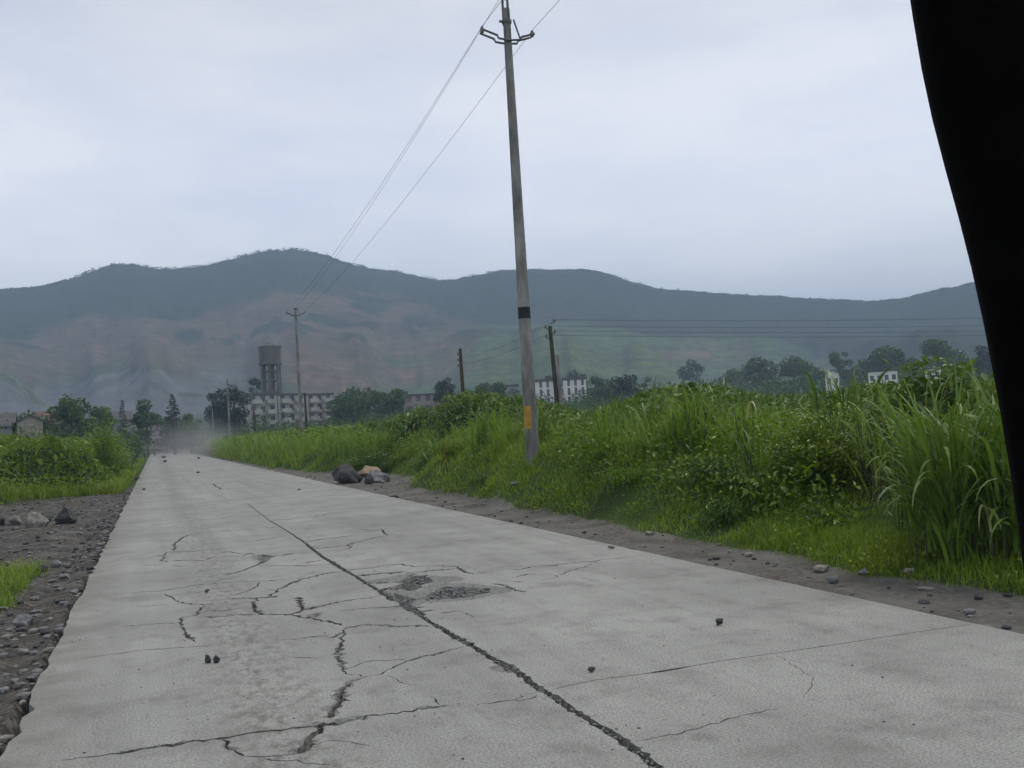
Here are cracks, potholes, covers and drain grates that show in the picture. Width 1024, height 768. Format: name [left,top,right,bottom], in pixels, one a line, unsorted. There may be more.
crack [633,707,778,743]
pothole [407,582,513,603]
crack [68,511,492,767]
